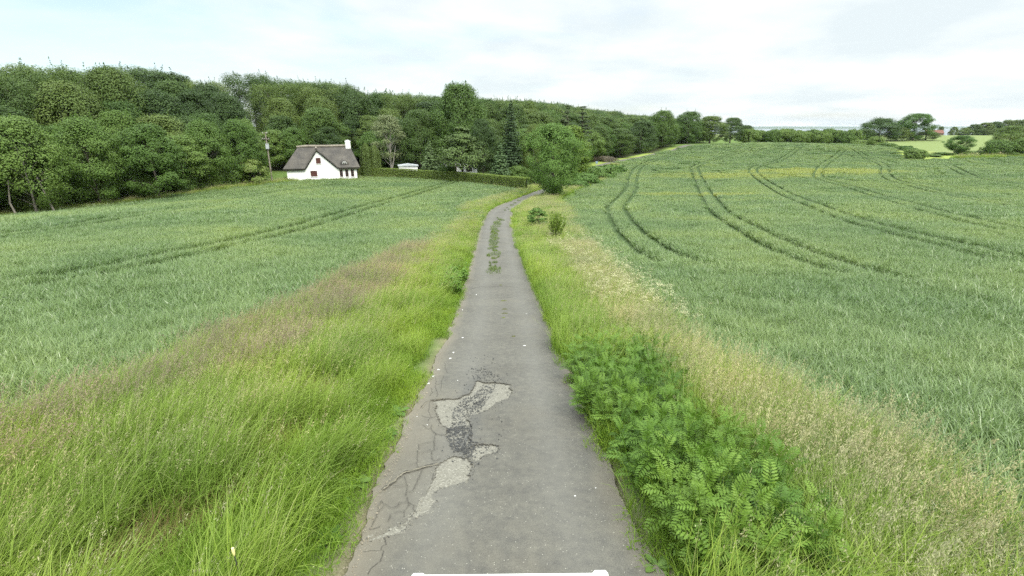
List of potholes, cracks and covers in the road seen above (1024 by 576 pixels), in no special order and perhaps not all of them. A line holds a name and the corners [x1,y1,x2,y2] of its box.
pothole [432,382,512,449]
crack [364,376,446,574]
pothole [468,445,499,461]
pothole [365,457,473,543]
